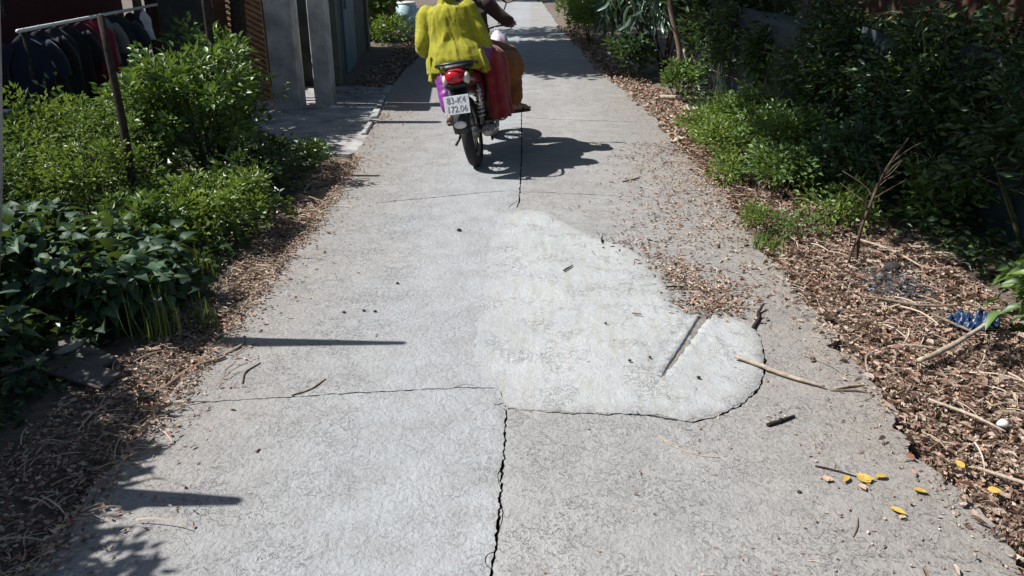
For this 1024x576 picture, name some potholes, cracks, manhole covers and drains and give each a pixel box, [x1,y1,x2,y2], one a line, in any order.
crack [513,112,523,207]
crack [205,387,507,576]
